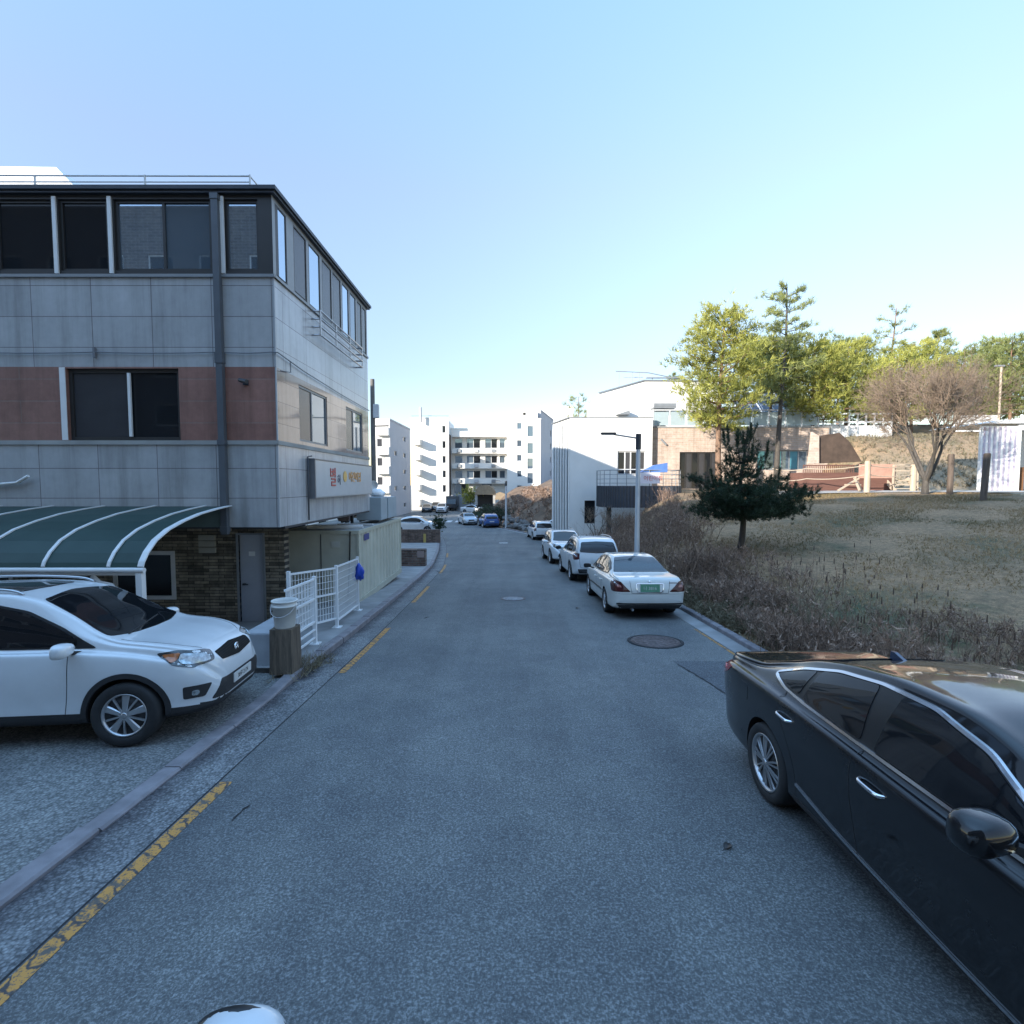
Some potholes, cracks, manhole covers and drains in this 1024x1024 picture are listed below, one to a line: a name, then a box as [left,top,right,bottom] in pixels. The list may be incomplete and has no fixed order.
manhole cover [627,635,684,649]
